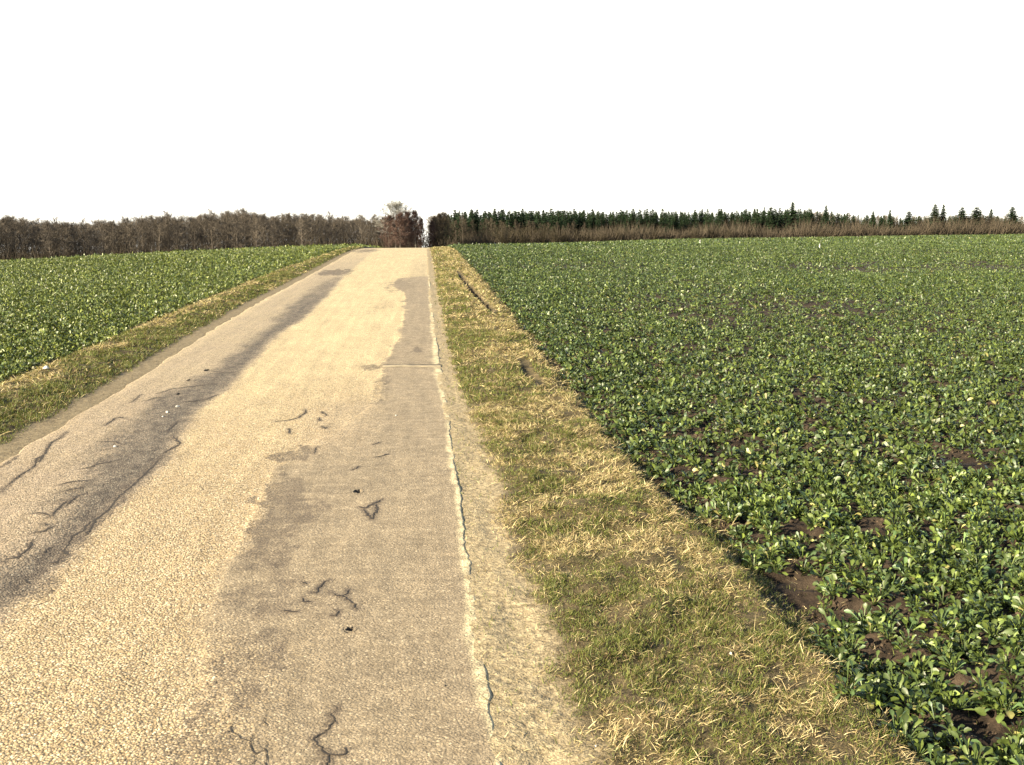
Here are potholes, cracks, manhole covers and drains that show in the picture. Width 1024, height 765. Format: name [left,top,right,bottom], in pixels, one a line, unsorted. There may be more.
crack [312,707,347,765]
crack [361,500,380,519]
crack [1,422,181,563]
